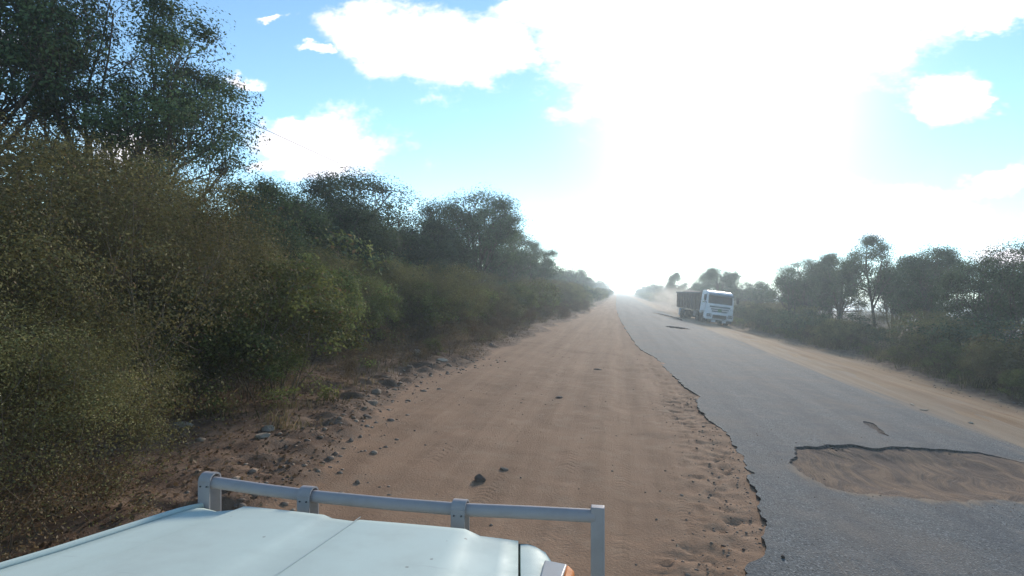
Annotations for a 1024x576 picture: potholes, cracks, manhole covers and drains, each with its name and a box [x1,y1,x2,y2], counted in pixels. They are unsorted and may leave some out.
pothole [863,421,889,436]
pothole [789,444,1024,502]
